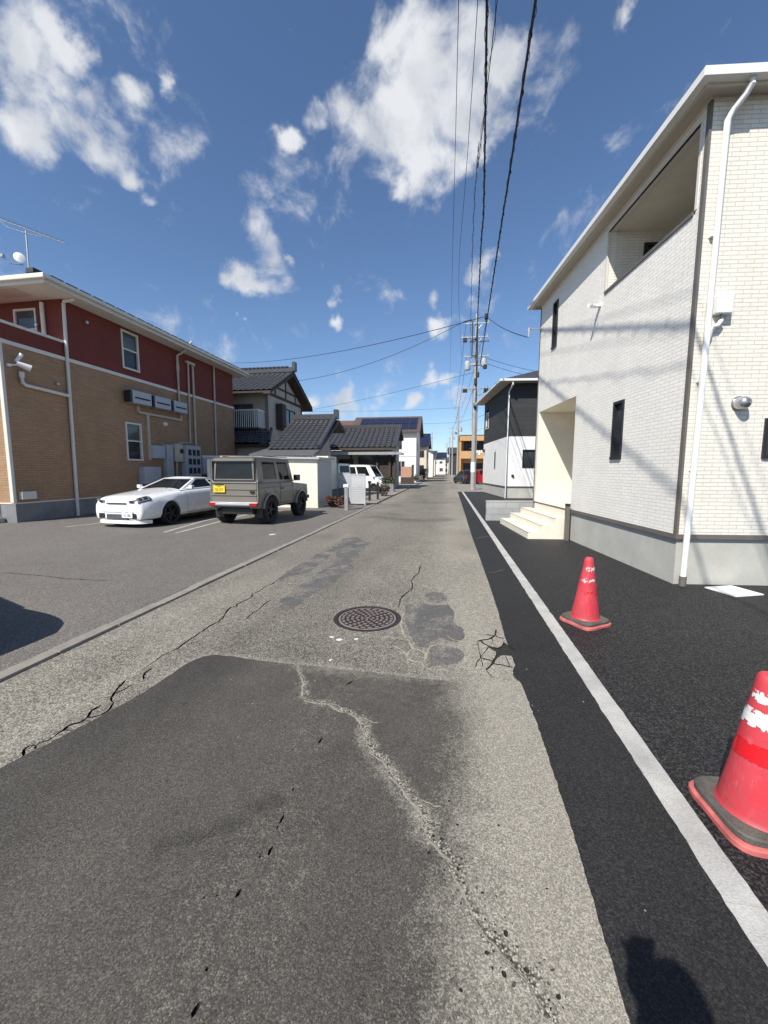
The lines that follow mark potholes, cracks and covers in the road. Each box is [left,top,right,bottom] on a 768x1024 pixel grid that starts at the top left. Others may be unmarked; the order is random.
crack [294,665,567,1017]
crack [22,575,284,757]
crack [393,564,516,678]
manhole cover [333,606,401,632]
crack [1,572,110,581]
